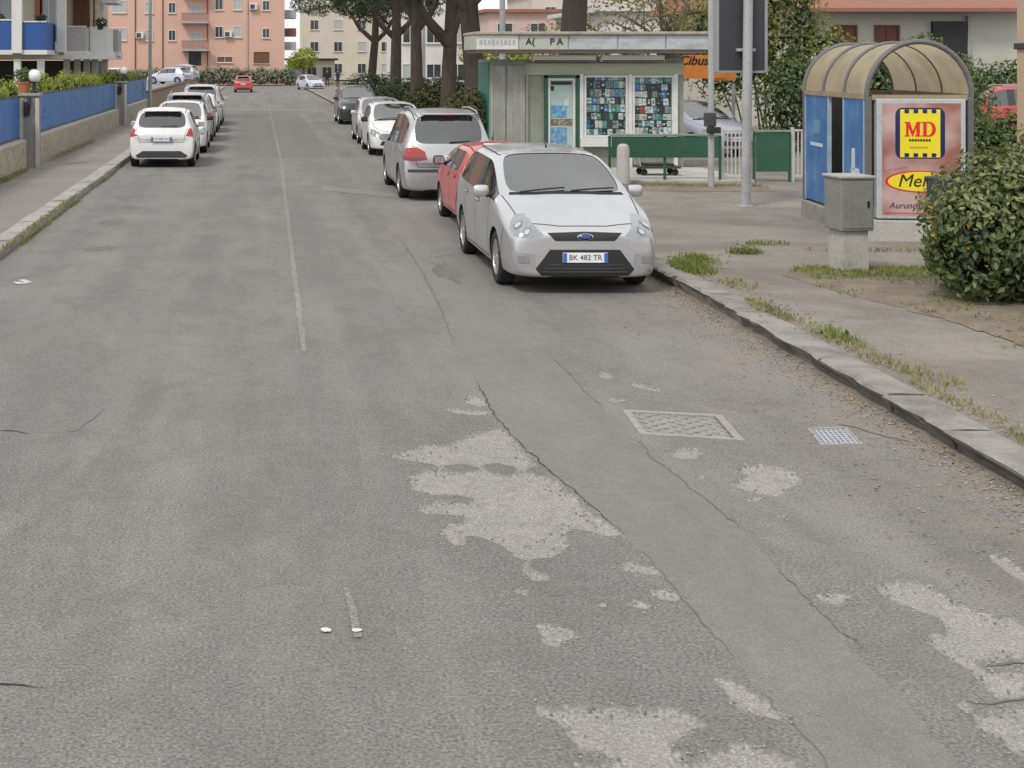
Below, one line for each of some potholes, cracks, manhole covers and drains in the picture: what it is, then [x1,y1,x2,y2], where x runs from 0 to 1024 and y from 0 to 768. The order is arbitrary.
drain grate [807,426,863,446]
manhole cover [623,409,745,441]
